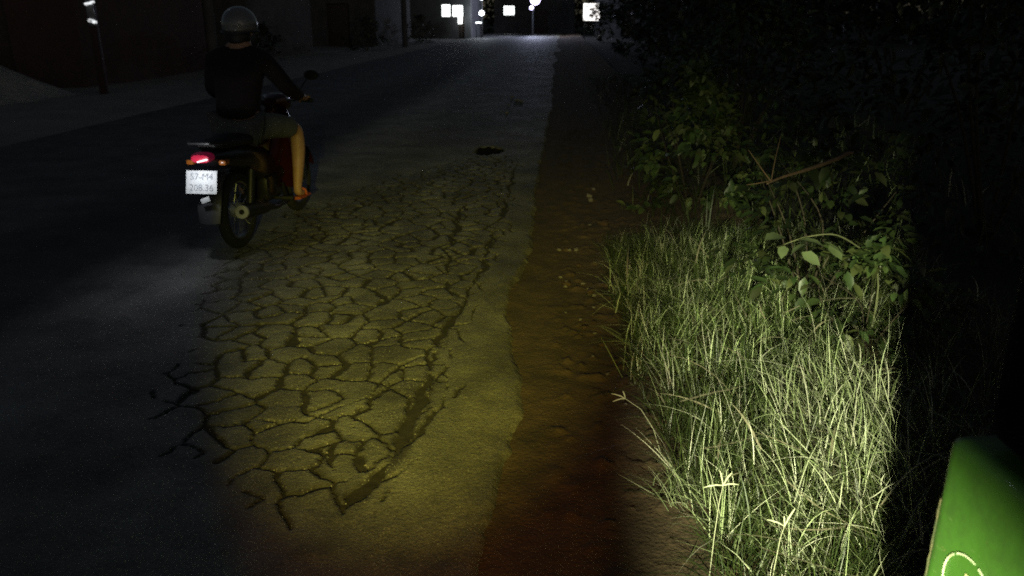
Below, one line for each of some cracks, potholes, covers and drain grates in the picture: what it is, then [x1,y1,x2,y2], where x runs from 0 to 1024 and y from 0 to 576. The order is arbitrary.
pothole [475,147,504,155]
